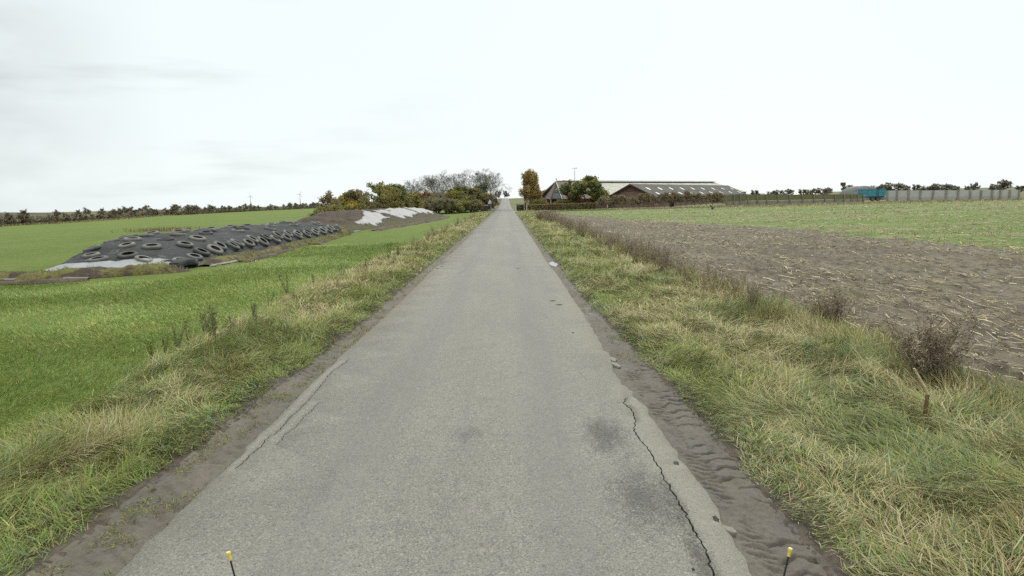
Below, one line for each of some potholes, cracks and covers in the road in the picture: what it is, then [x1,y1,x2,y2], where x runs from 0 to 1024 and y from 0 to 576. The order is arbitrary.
crack [623,398,715,576]
crack [235,359,350,469]
